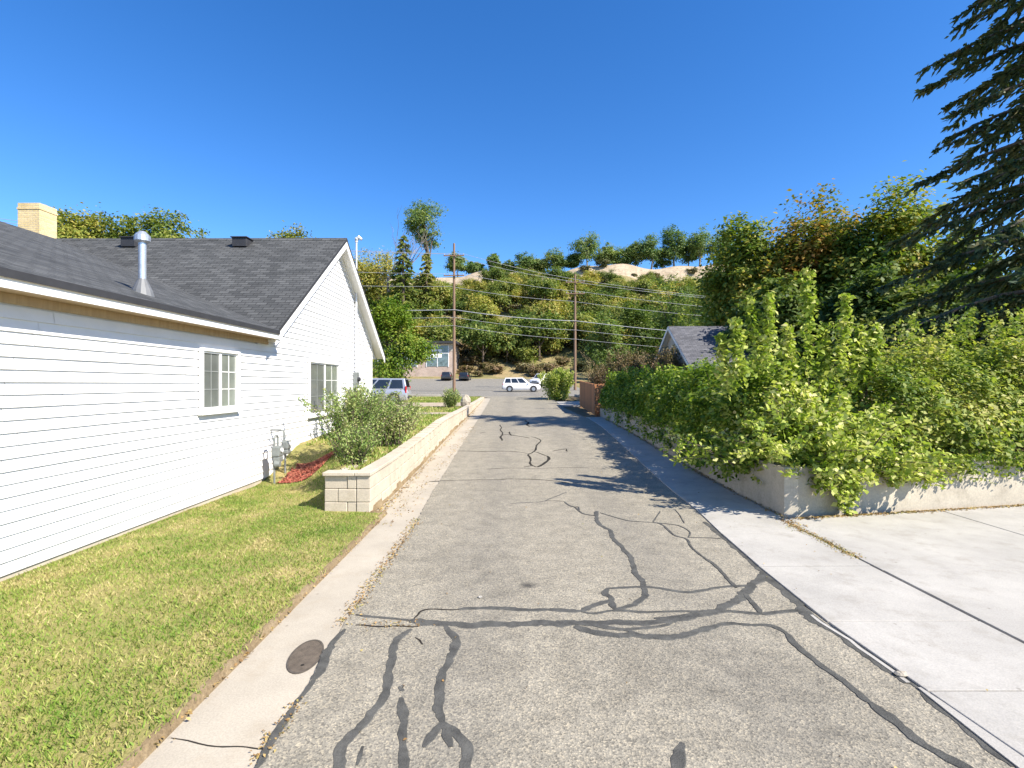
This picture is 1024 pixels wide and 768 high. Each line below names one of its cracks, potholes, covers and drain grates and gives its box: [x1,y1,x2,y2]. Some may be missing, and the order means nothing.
manhole cover [287,639,324,674]
crack [444,419,579,504]
crack [356,746,364,765]
